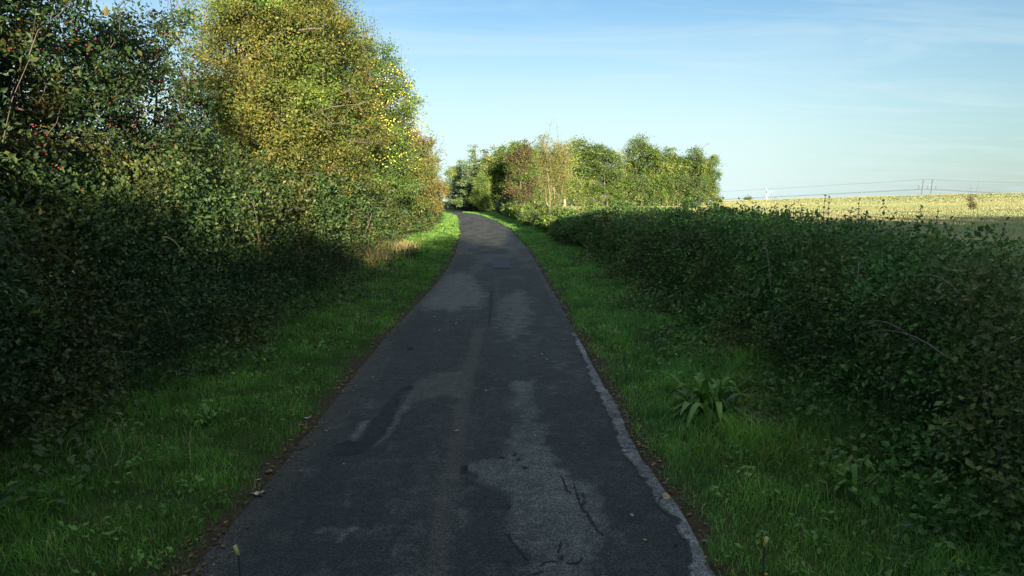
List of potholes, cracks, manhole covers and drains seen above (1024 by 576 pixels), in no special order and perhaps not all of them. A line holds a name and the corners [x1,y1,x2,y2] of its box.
crack [503,475,603,575]
